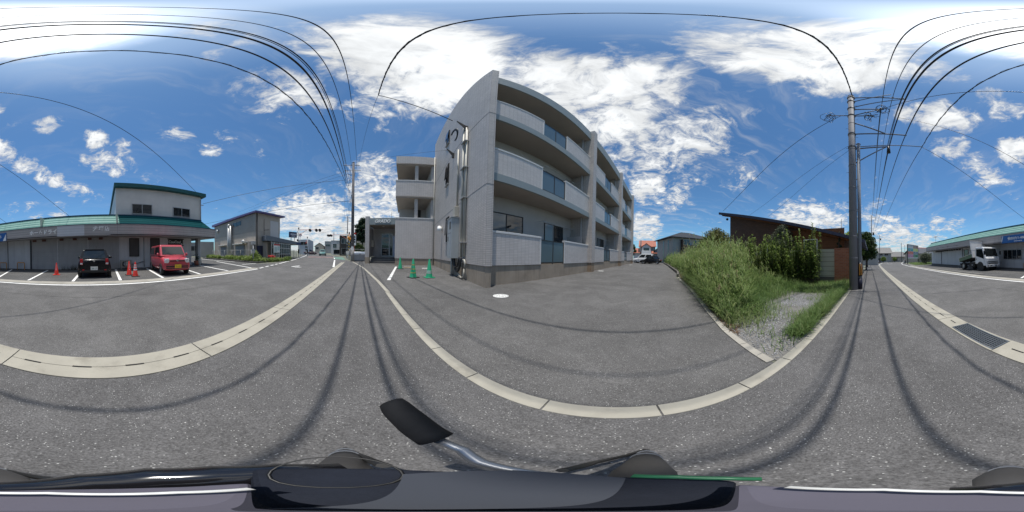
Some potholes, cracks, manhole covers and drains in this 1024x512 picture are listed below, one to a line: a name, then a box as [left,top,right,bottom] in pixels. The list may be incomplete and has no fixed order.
drain grate [952,323,1009,350]
